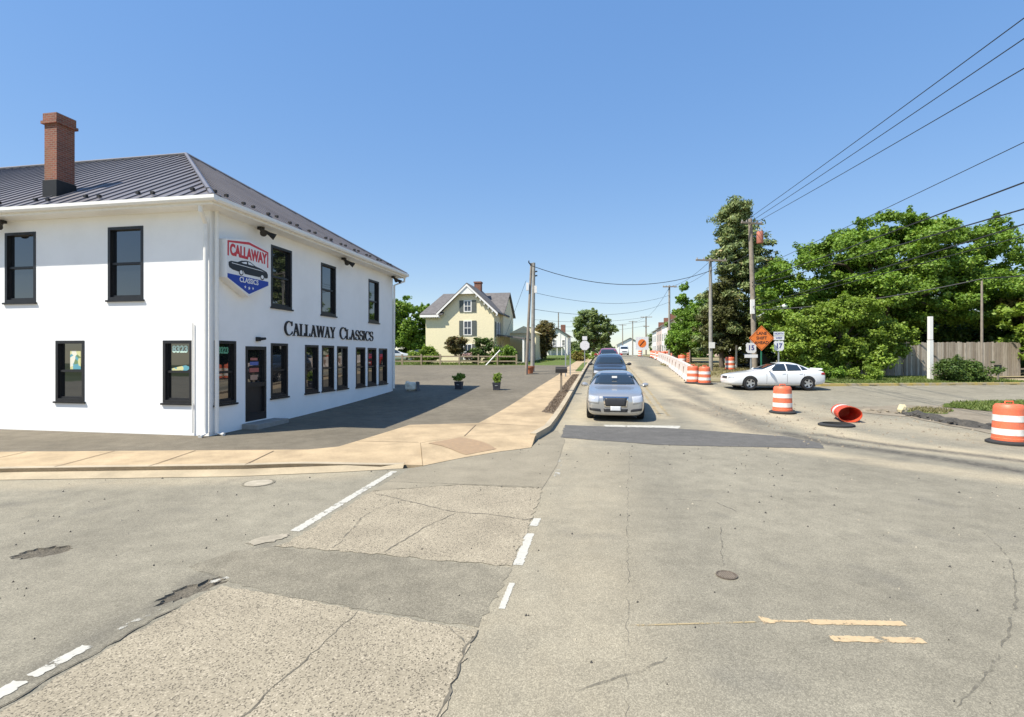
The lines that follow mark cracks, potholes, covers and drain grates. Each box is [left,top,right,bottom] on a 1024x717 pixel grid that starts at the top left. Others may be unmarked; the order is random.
pothole [154,577,227,607]
manhole cover [241,479,275,487]
crack [958,548,1018,706]
crack [334,493,533,552]
crack [242,612,357,717]
crack [436,630,478,717]
manhole cover [716,570,738,580]
pothole [11,545,73,560]
